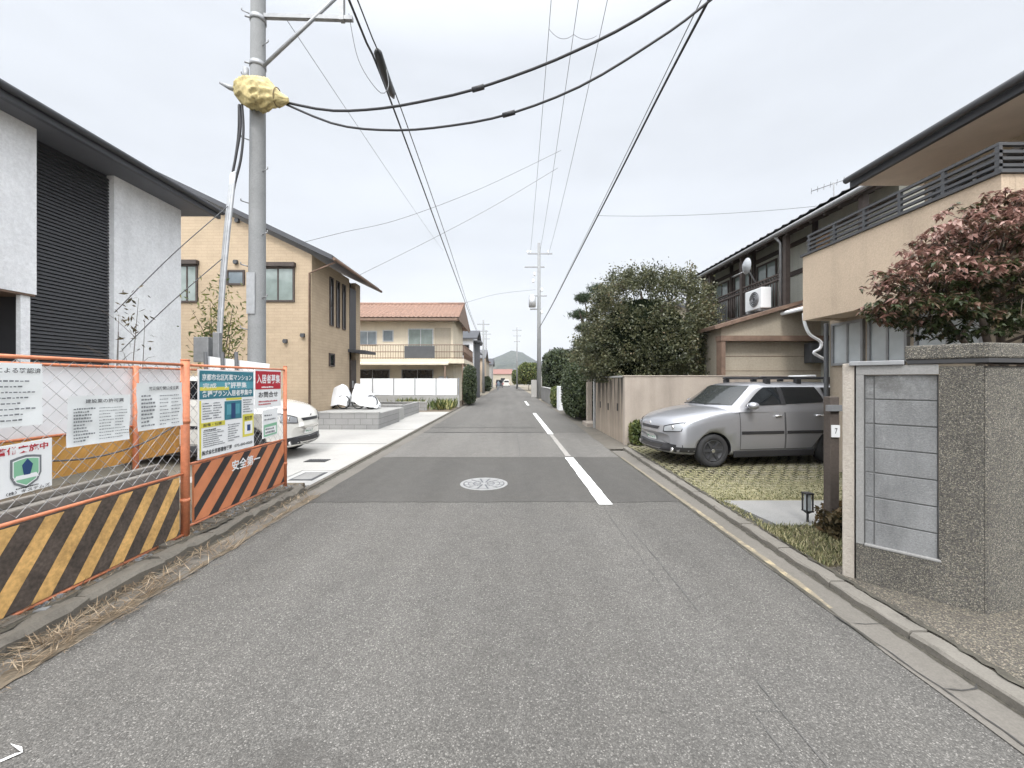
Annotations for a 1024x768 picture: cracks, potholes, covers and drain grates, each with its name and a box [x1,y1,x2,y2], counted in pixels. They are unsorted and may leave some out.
utility cover [288,472,328,481]
manhole cover [460,478,508,490]
